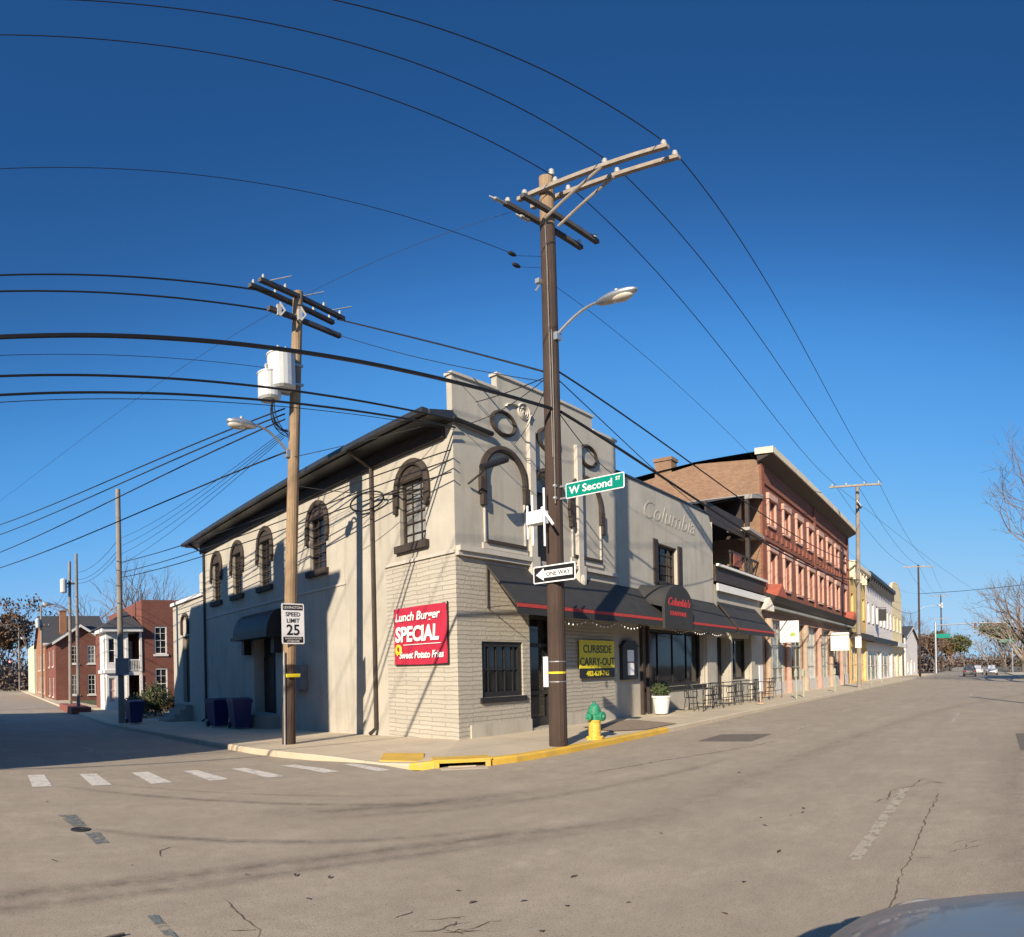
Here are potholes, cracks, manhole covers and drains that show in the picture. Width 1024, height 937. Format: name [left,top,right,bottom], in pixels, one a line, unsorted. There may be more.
drain grate [431,755,492,770]
crack [224,899,260,936]
crack [397,911,492,934]
